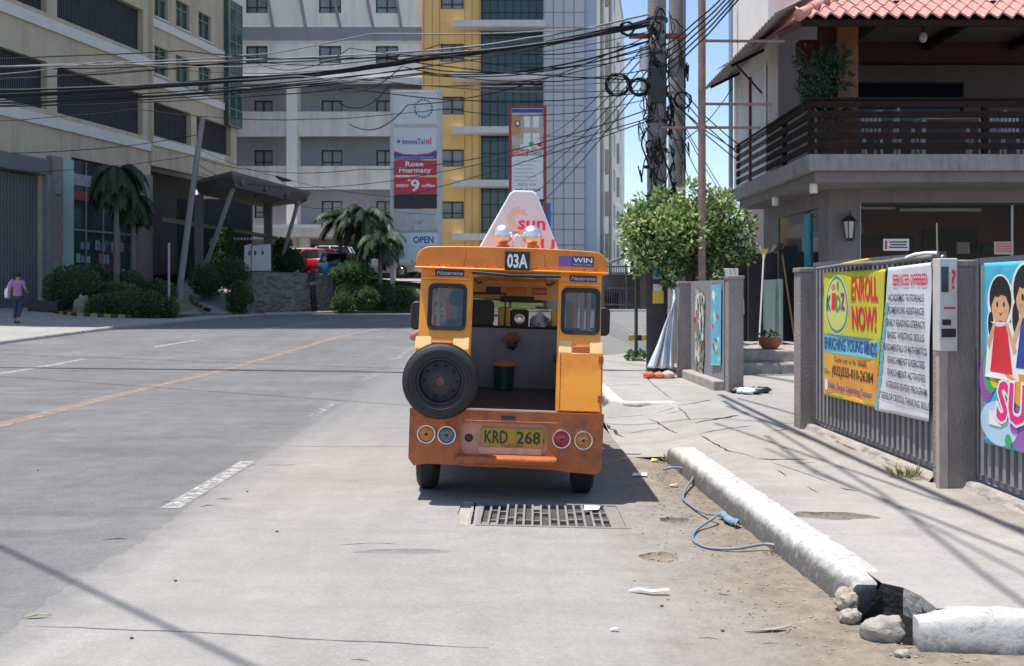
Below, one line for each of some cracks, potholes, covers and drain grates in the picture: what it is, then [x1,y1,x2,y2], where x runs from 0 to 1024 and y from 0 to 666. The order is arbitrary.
pothole [638,552,678,563]
crack [607,400,856,492]
pothole [793,511,880,520]
drain grate [476,502,632,529]
